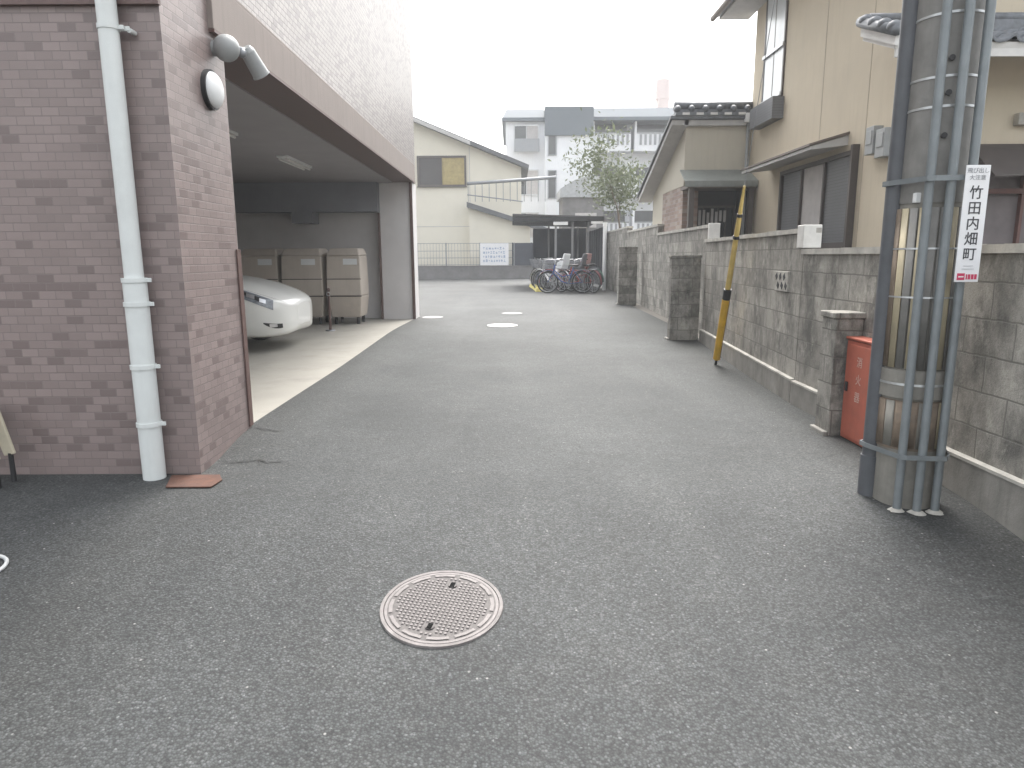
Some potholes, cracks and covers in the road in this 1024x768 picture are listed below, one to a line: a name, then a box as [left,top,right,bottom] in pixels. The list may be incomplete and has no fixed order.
manhole cover [379,570,503,649]
